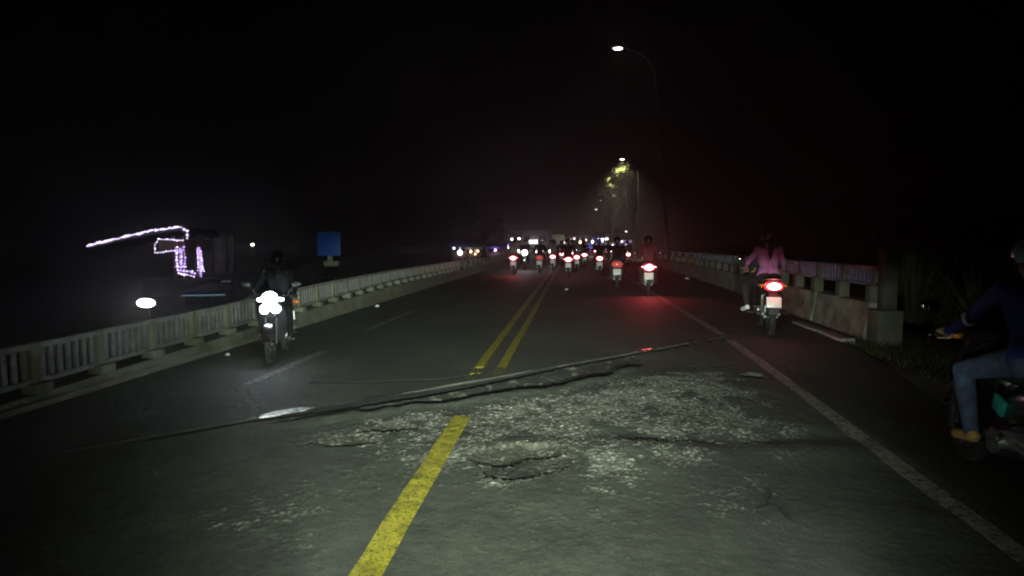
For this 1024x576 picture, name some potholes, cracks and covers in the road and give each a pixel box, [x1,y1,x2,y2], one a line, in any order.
pothole [354,422,421,433]
pothole [294,435,380,447]
pothole [465,442,572,481]
crack [309,366,494,384]
